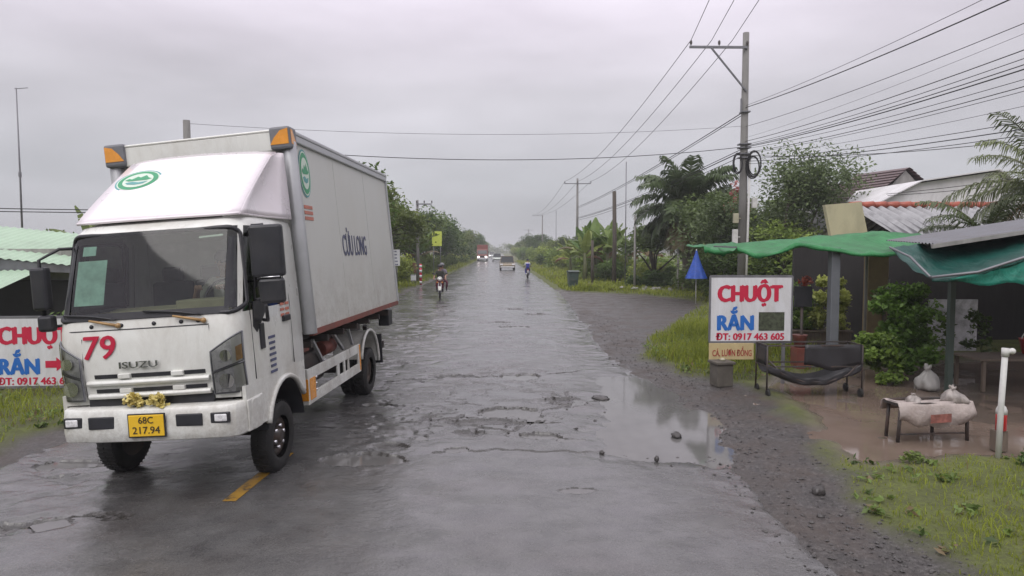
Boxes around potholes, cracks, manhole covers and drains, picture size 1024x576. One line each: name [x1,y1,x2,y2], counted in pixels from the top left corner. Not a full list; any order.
pothole [452,429,487,437]
crack [69,511,137,521]
pothole [519,431,565,440]
pothole [436,417,546,427]
pothole [476,406,545,419]
